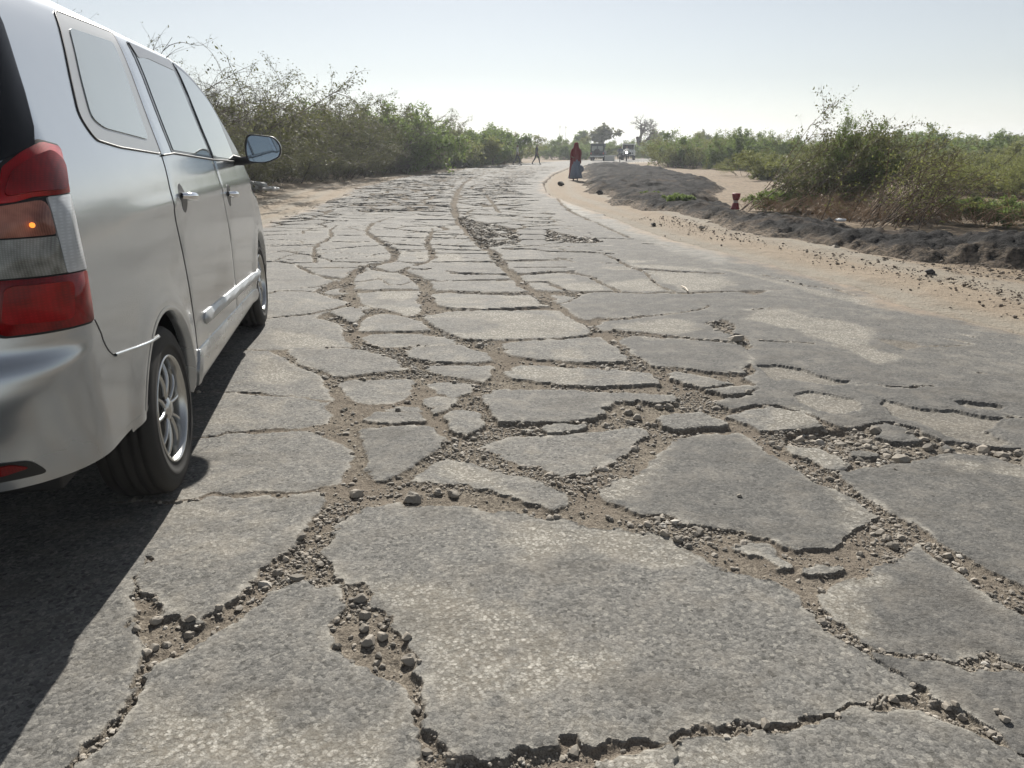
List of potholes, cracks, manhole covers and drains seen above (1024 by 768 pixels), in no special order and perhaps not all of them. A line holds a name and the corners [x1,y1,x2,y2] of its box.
pothole [706,318,753,350]
pothole [457,215,522,249]
crack [65,166,1024,768]
